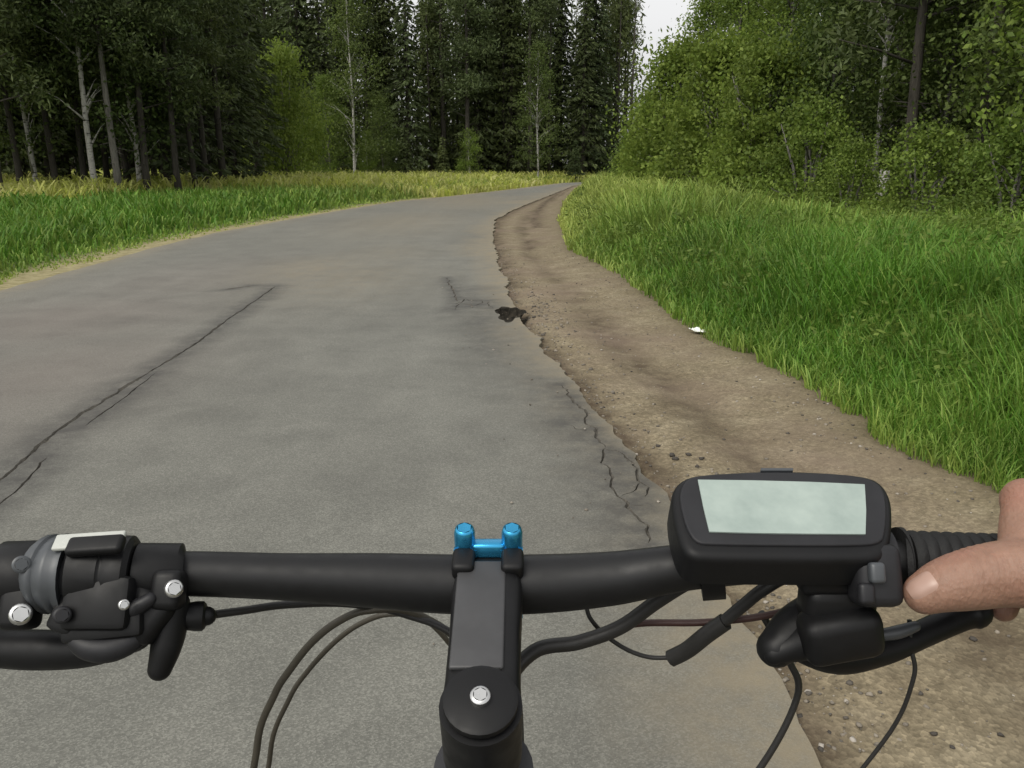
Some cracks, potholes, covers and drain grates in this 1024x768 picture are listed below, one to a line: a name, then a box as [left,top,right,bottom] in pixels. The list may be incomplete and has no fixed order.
crack [0,286,272,504]
crack [562,386,652,544]
pothole [495,306,527,323]
crack [447,279,493,310]
